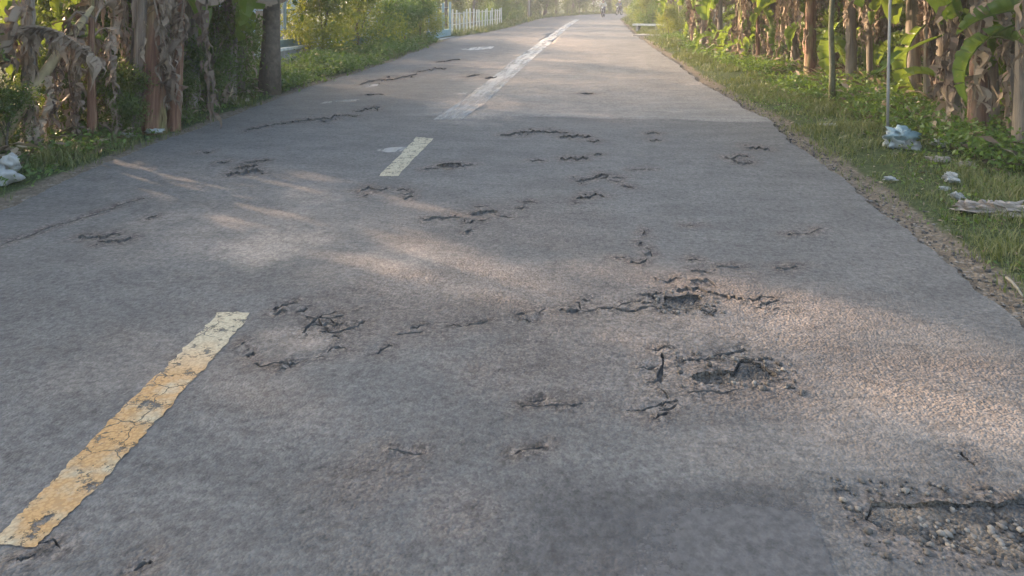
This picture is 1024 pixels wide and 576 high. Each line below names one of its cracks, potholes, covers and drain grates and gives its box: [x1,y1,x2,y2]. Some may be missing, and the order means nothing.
crack [521,399,583,407]
crack [724,145,770,165]
crack [501,128,651,204]
crack [1,198,157,246]
crack [245,106,379,132]
pothole [690,359,777,385]
crack [360,186,533,234]
pothole [865,499,1024,560]
crack [241,230,780,369]
crack [203,152,269,177]
